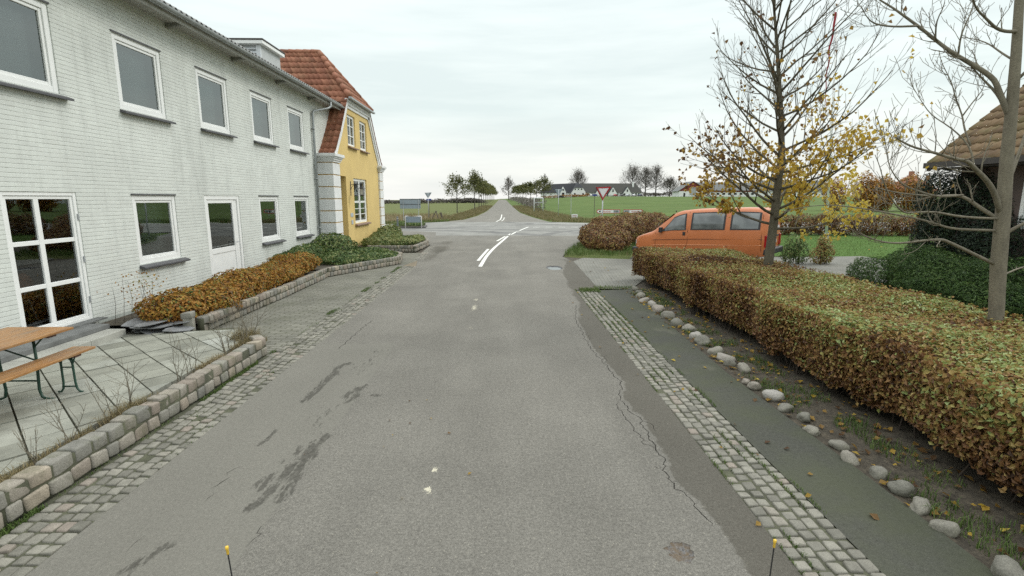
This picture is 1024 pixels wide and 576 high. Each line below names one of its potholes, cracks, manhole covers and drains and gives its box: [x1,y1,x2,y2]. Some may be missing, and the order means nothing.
crack [575,307,713,524]
